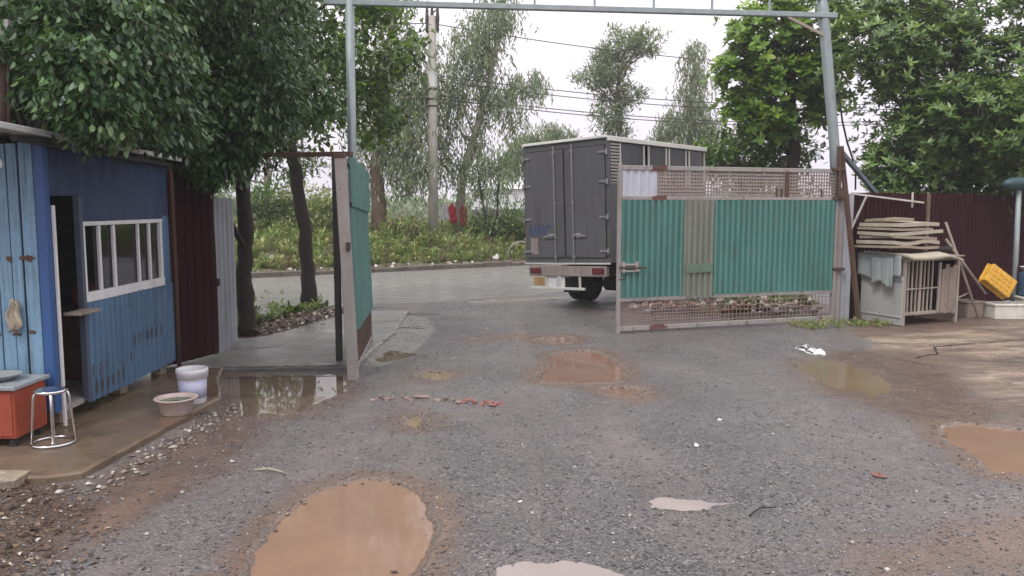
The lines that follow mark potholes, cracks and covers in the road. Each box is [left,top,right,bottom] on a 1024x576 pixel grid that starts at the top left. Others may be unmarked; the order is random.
pothole [413,370,460,381]
pothole [238,476,443,576]
pothole [935,421,1024,476]
pothole [531,334,578,344]
pothole [536,349,632,384]
pothole [596,385,652,398]
pothole [396,412,430,430]
